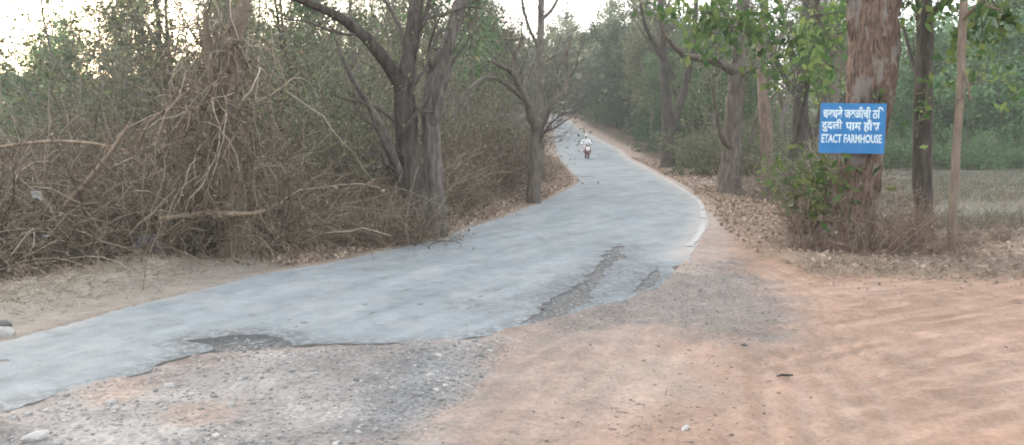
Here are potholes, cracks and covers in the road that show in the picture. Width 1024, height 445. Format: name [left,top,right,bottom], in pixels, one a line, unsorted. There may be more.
pothole [521,246,626,323]
pothole [184,334,293,354]
pothole [634,266,661,292]
